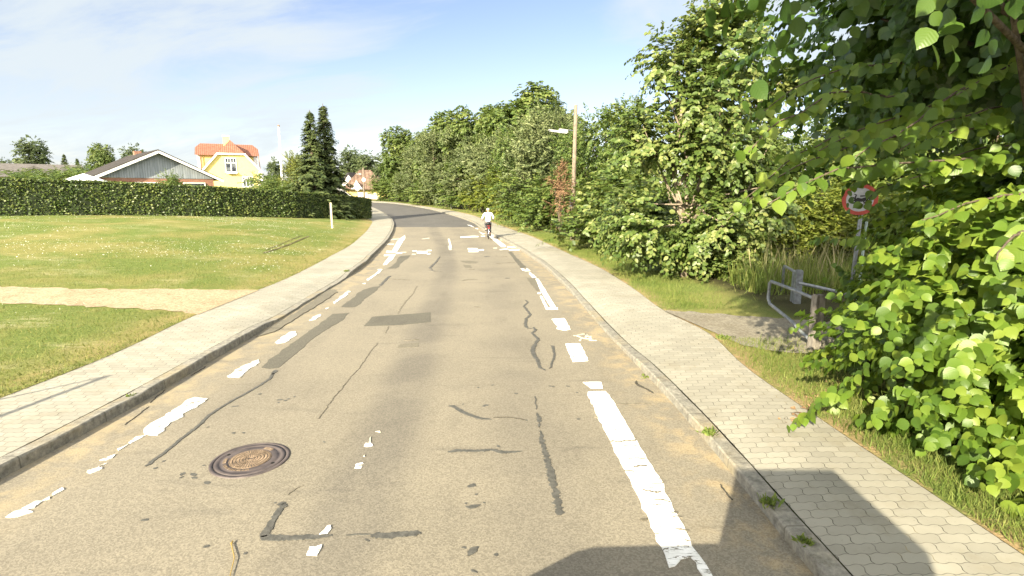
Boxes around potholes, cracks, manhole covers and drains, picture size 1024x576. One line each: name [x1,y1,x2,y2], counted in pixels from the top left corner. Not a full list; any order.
manhole cover [208,443,290,479]
crack [318,256,441,419]
